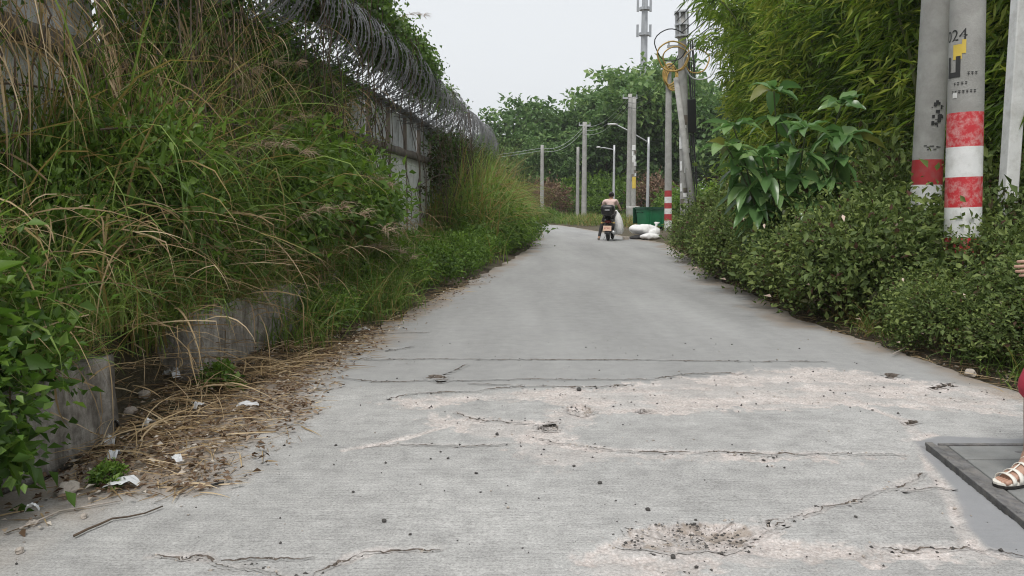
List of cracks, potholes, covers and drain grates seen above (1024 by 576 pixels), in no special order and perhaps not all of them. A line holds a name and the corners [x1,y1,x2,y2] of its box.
pothole [559,402,598,417]
crack [154,546,441,576]
pothole [422,374,453,383]
crack [338,331,957,537]
pothole [532,420,563,433]
pothole [615,519,760,556]
